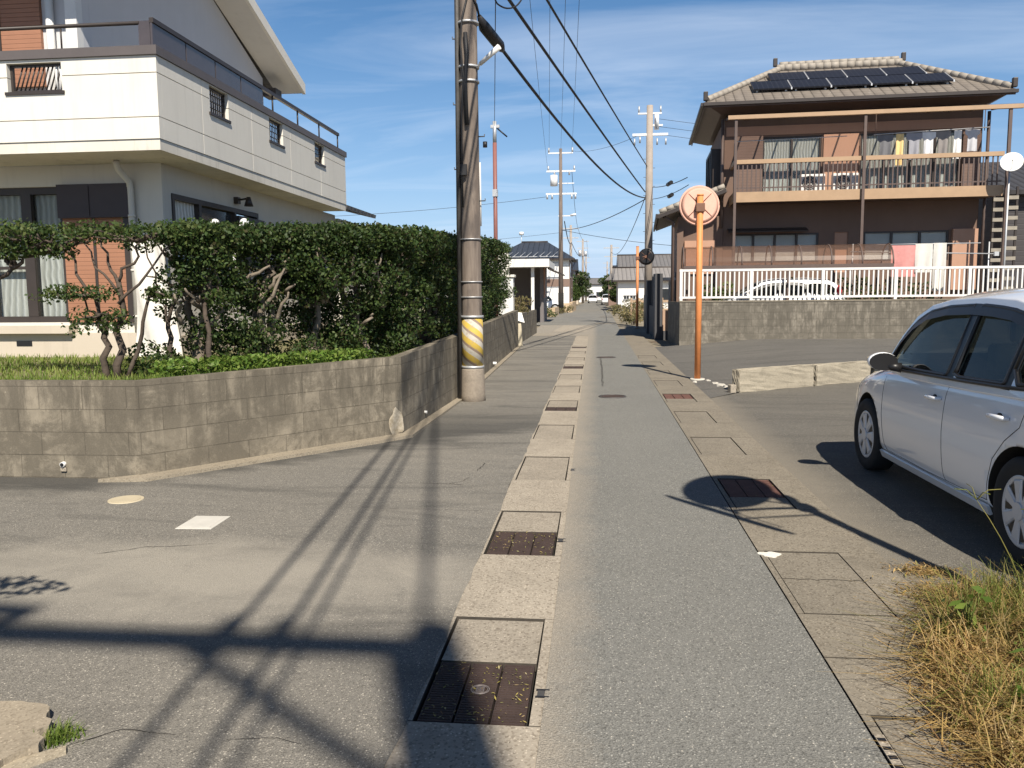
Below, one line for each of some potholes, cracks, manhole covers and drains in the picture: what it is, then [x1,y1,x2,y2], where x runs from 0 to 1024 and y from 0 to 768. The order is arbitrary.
drain grate [417,662,550,726]
drain grate [873,734,905,768]
crack [70,729,175,745]
drain grate [486,531,566,556]
drain grate [719,479,783,498]
